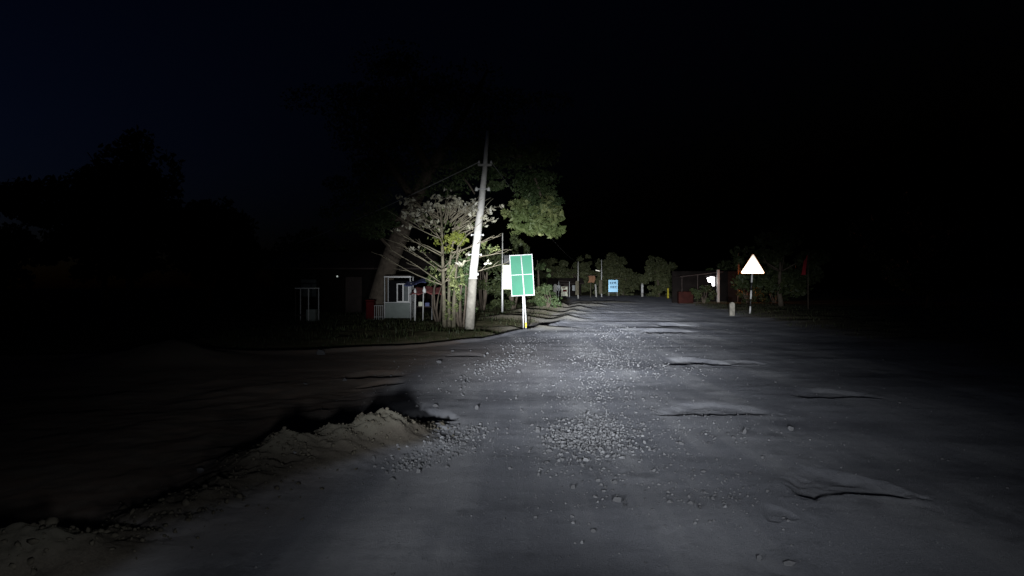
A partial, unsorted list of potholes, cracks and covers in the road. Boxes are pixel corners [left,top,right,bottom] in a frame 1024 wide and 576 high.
pothole [778,462,938,503]
pothole [759,502,801,523]
pothole [788,388,884,399]
pothole [661,356,737,367]
pothole [333,369,411,379]
pothole [400,408,460,421]
pothole [654,401,787,417]
